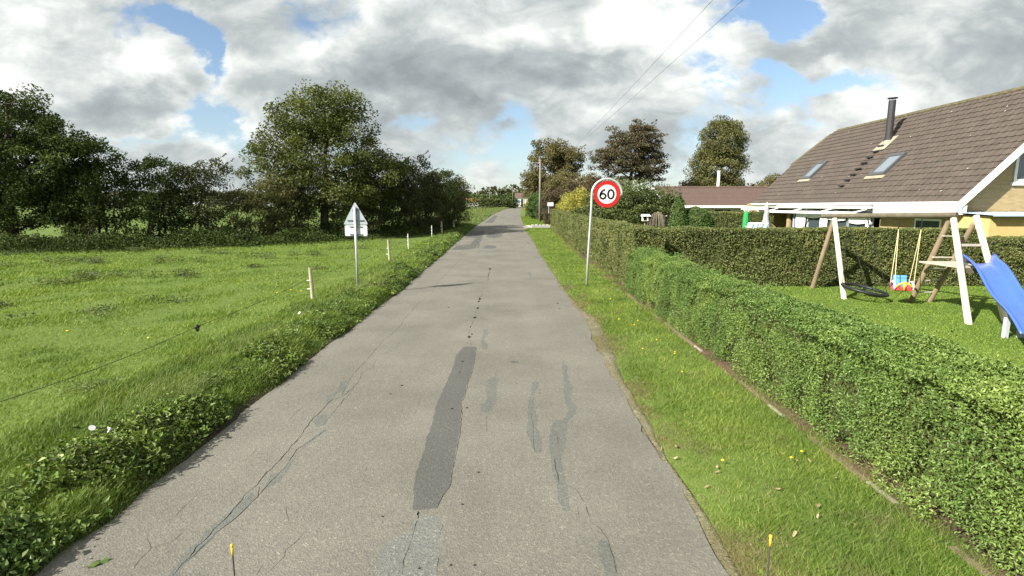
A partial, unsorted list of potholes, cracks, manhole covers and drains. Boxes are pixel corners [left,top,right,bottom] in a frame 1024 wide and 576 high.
crack [554,435,618,576]
crack [134,280,440,574]
